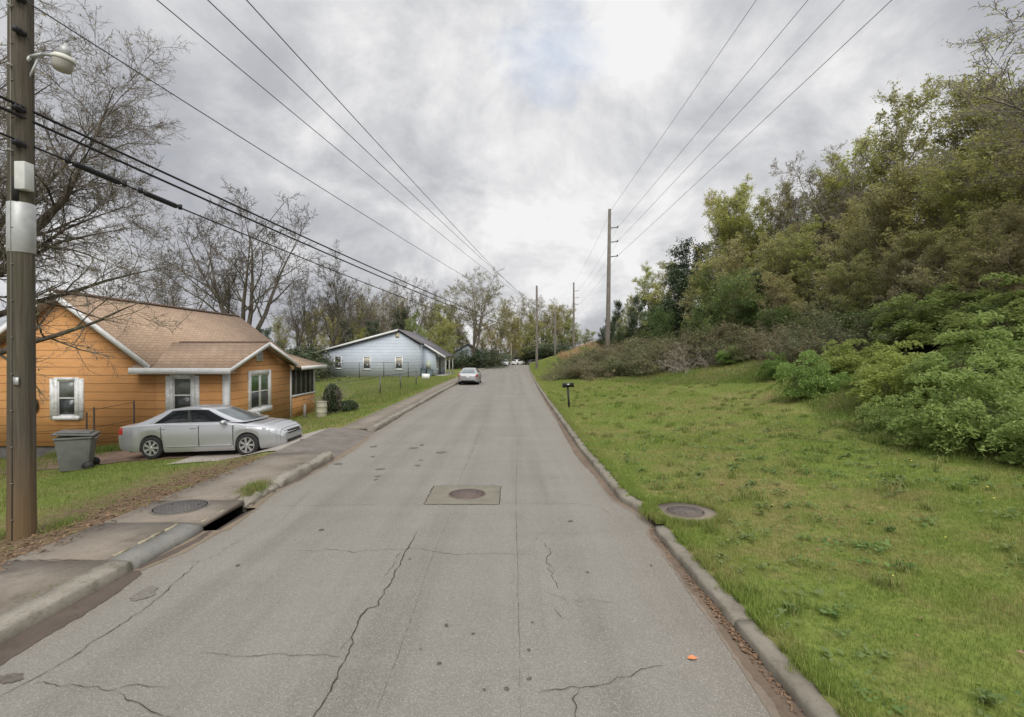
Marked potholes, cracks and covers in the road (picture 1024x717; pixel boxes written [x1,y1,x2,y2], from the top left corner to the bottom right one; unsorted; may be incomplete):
crack [43,681,170,717]
crack [539,665,661,717]
manhole cover [149,499,211,515]
manhole cover [448,489,486,499]
crack [200,533,509,717]
manhole cover [658,502,717,525]
